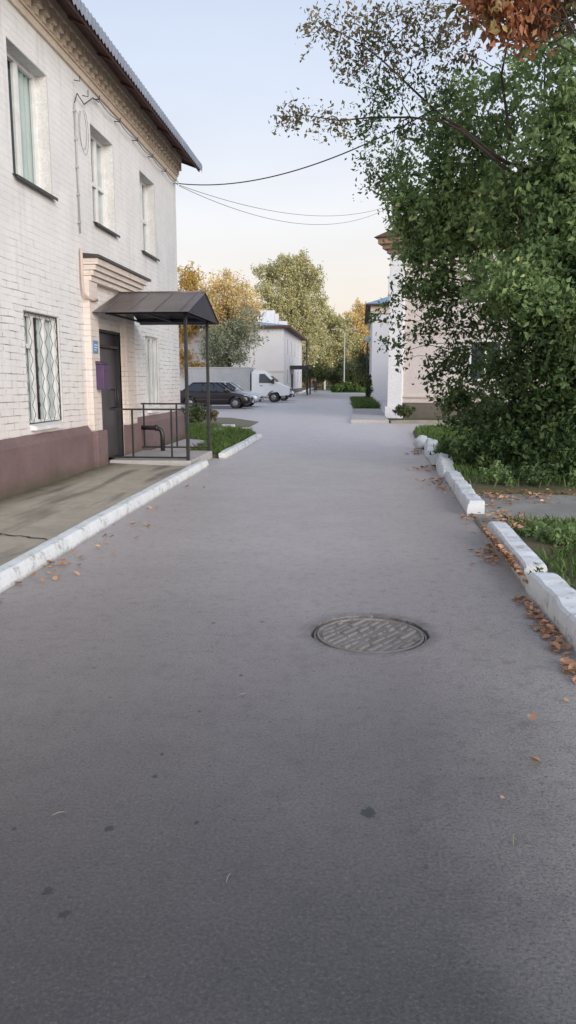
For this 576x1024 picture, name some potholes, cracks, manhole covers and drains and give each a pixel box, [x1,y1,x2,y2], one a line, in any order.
manhole cover [314,618,427,653]
